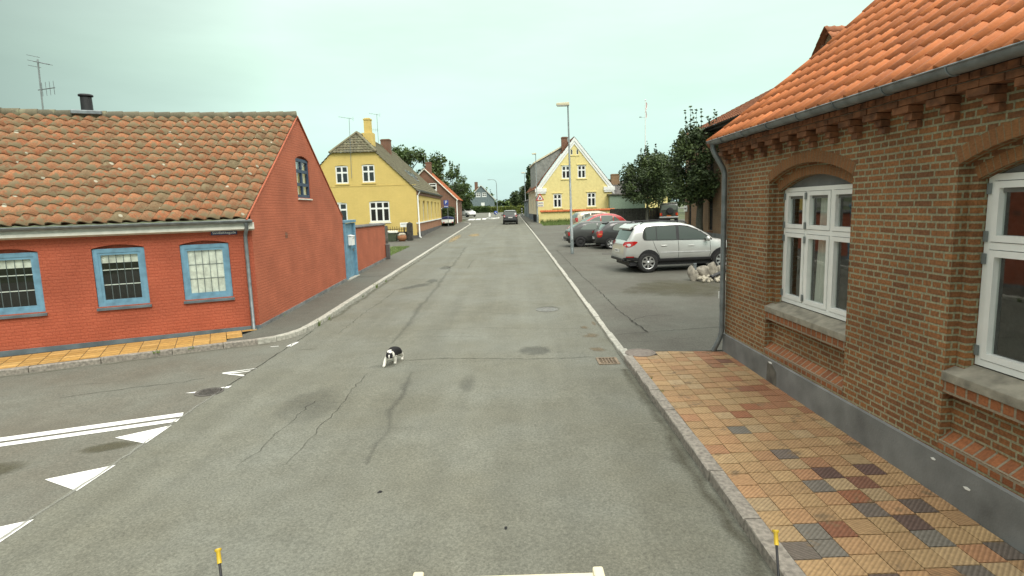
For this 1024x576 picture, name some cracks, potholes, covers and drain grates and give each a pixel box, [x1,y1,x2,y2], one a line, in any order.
manhole cover [625,349,656,357]
manhole cover [194,387,224,397]
crack [560,253,710,334]
drain grate [596,357,620,365]
